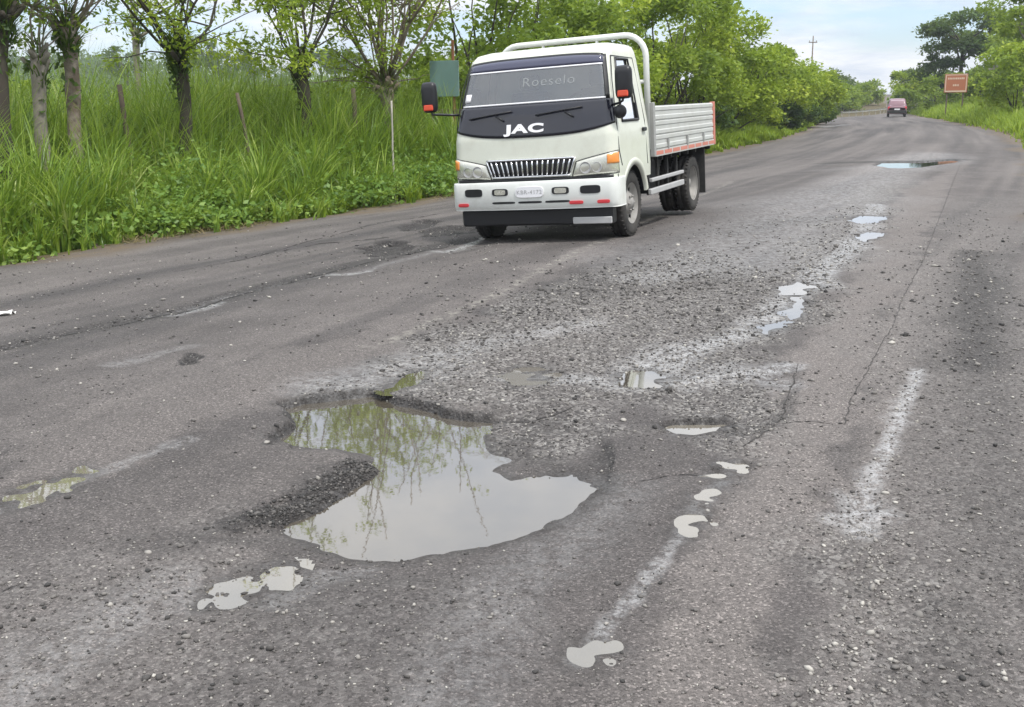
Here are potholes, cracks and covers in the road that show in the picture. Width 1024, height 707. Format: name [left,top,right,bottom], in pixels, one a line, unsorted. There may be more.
pothole [0,455,114,518]
pothole [171,551,323,622]
pothole [648,498,732,545]
crack [743,364,823,446]
pothole [598,364,689,393]
pothole [547,631,635,680]
pothole [177,352,206,366]
pothole [766,295,823,322]
pothole [650,416,759,443]
pothole [672,449,772,507]
pothole [873,159,970,168]
